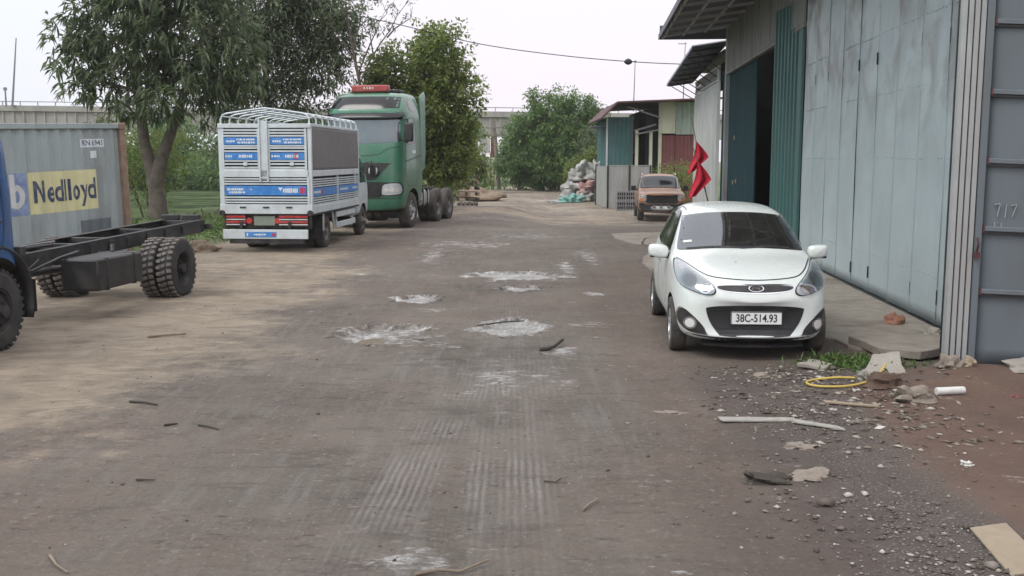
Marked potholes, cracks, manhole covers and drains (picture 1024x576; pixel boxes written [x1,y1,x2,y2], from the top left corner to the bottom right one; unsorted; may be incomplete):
pothole [383,294,446,305]
pothole [460,270,579,282]
pothole [462,316,551,338]
pothole [321,322,437,347]
pothole [493,285,543,293]
